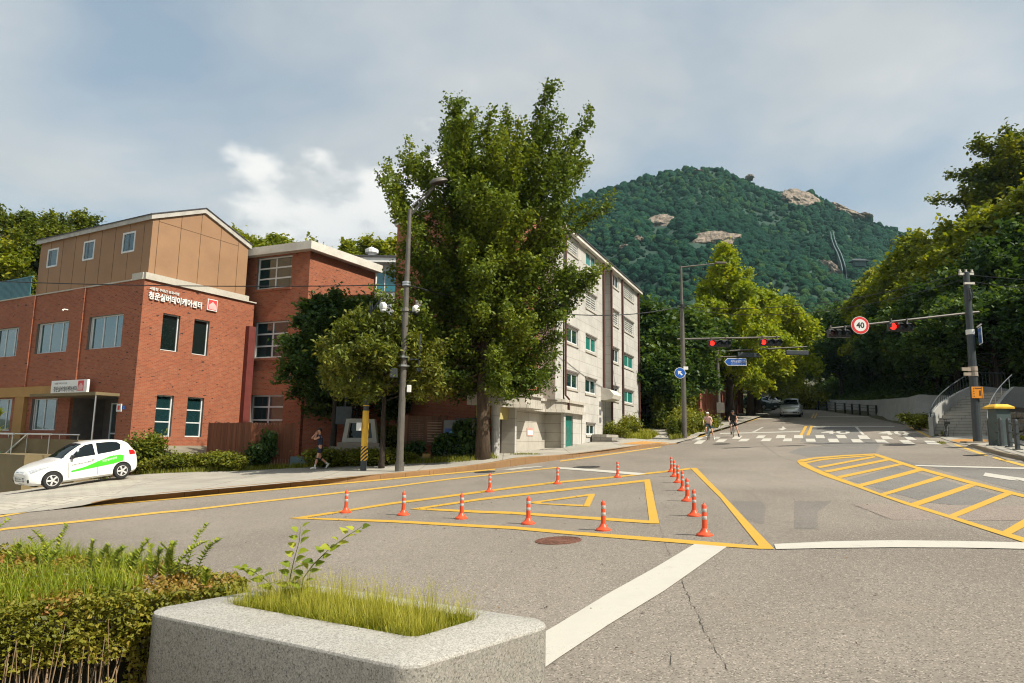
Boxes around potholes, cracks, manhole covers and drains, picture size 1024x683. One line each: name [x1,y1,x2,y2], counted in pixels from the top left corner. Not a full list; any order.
crack [653,493,736,675]
manhole cover [535,536,582,545]
